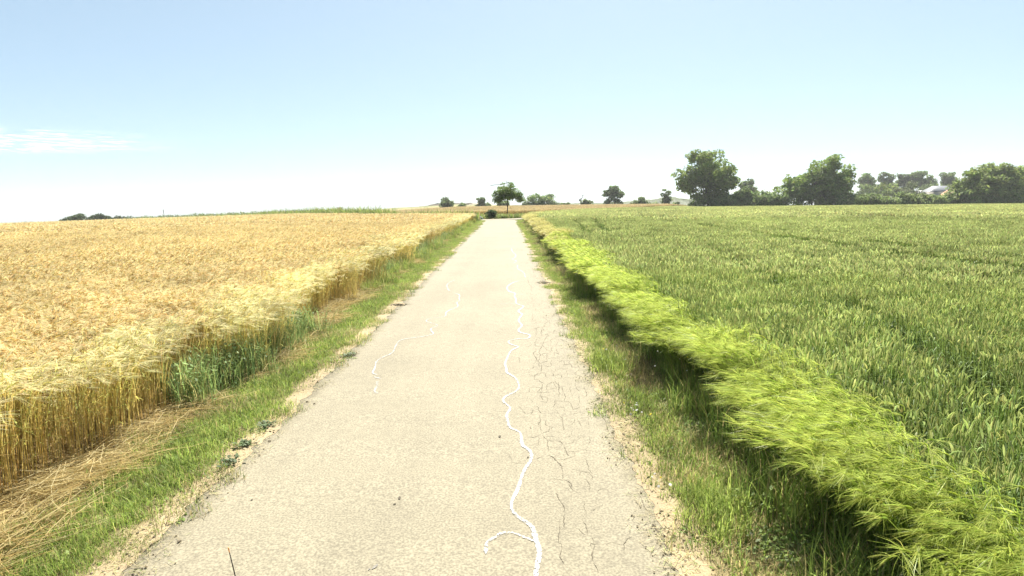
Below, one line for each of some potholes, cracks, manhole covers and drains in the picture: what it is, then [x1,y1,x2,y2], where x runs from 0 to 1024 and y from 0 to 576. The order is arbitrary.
crack [509,262,632,570]
